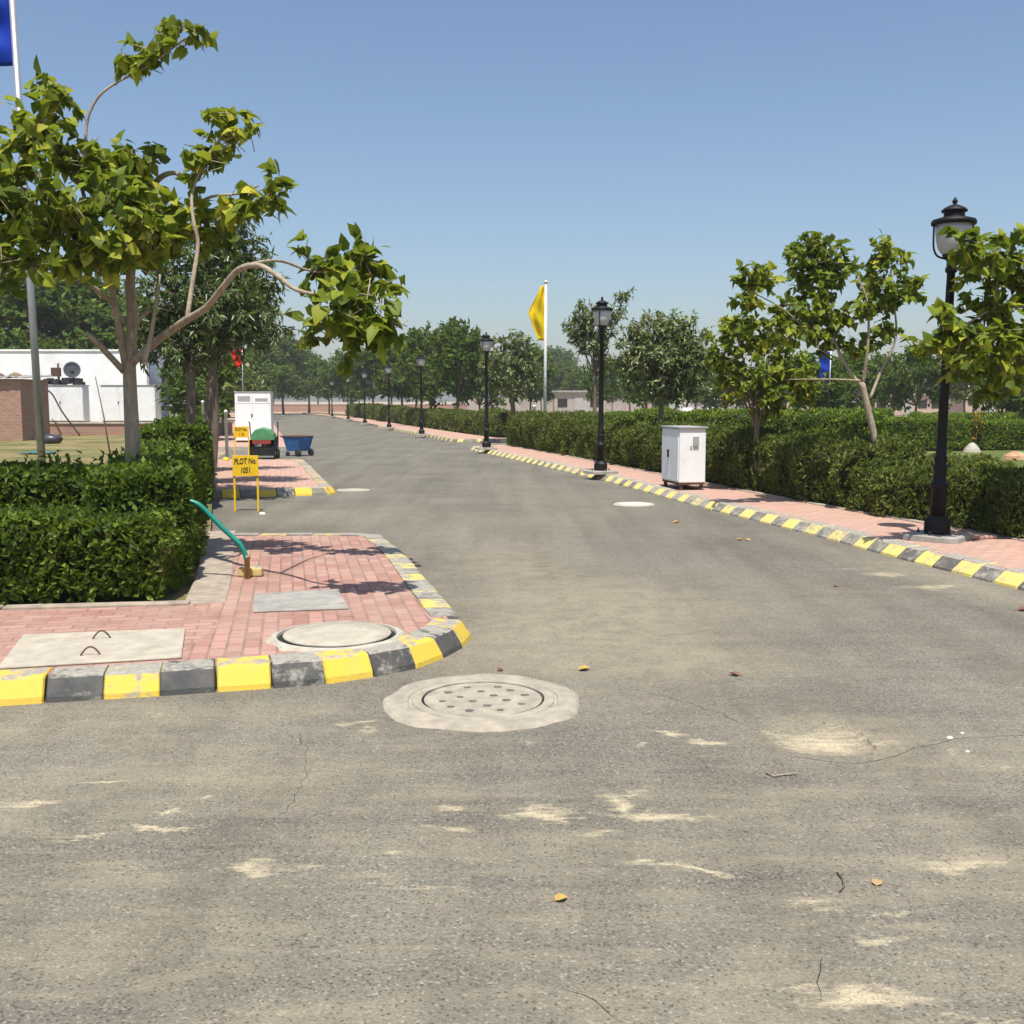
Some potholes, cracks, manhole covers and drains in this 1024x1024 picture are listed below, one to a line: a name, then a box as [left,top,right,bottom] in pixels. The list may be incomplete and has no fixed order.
utility cover [253,589,349,613]
crack [624,687,751,729]
manhole cover [383,674,580,732]
crack [784,735,1022,764]
utility cover [0,628,185,669]
crack [534,980,622,1023]
manhole cover [265,621,406,652]
